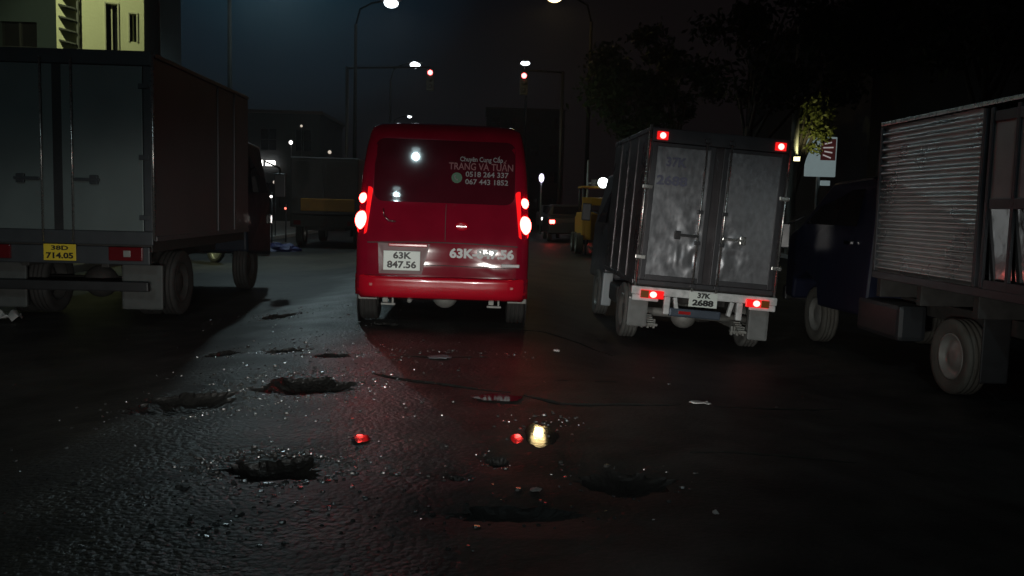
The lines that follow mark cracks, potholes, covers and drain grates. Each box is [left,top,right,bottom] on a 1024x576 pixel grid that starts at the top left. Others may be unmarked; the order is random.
pothole [485,457,509,468]
pothole [572,470,679,498]
pothole [220,456,322,482]
pothole [443,506,589,523]
pothole [248,376,359,396]
pothole [121,392,237,418]
pothole [260,312,298,320]
